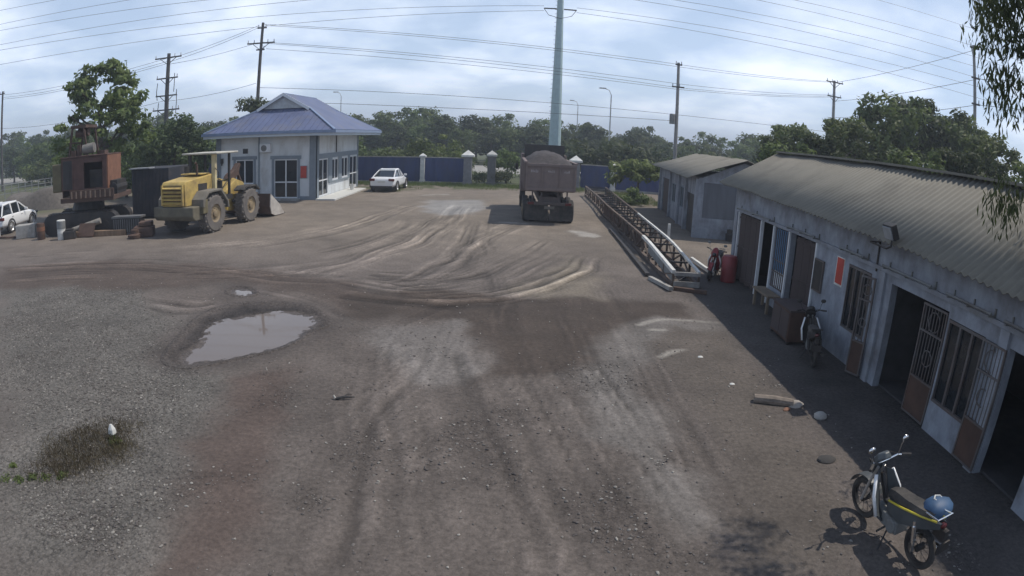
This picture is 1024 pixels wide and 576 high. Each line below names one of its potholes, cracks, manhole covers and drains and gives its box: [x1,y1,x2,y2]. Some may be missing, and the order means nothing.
pothole [160,301,332,370]
pothole [224,286,260,298]
